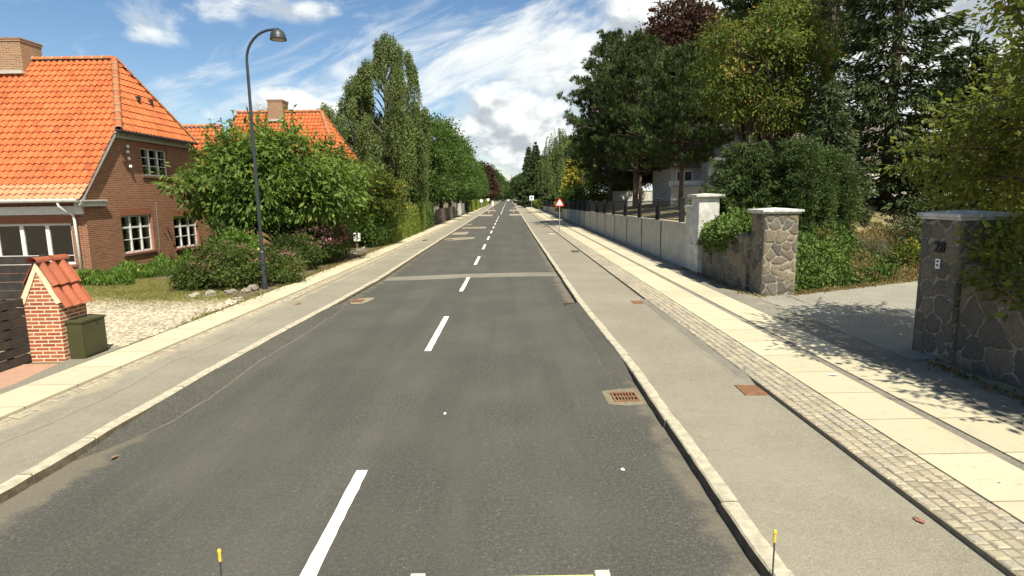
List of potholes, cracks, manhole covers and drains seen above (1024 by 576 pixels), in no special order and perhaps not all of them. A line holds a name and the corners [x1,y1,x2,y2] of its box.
drain grate [610,392,640,402]
manhole cover [735,385,769,395]
